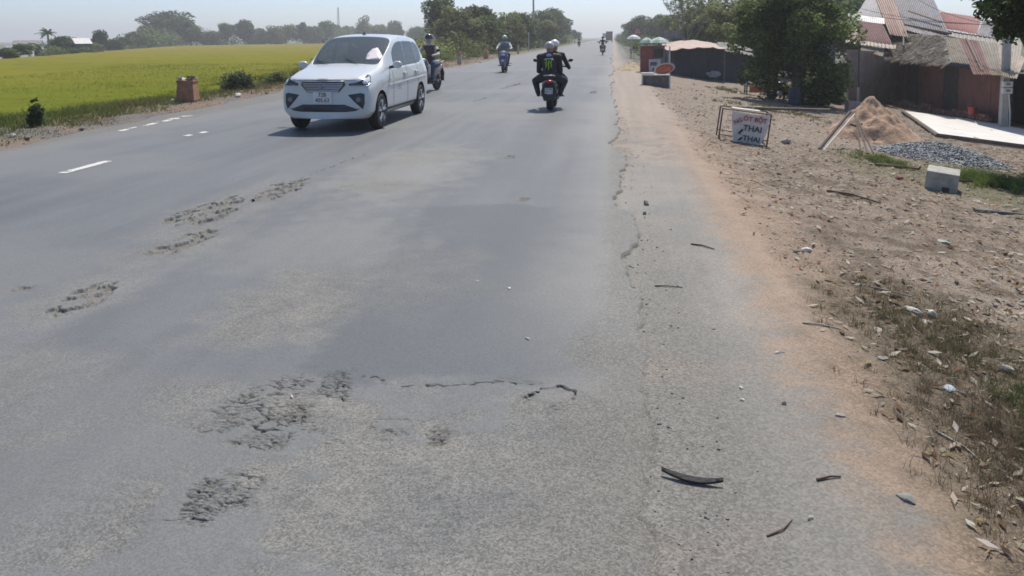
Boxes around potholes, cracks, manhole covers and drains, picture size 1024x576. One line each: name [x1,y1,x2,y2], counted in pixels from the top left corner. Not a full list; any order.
pothole [251,175,318,203]
pothole [26,277,132,321]
pothole [129,226,228,258]
crack [150,365,548,535]
pothole [146,193,254,229]
